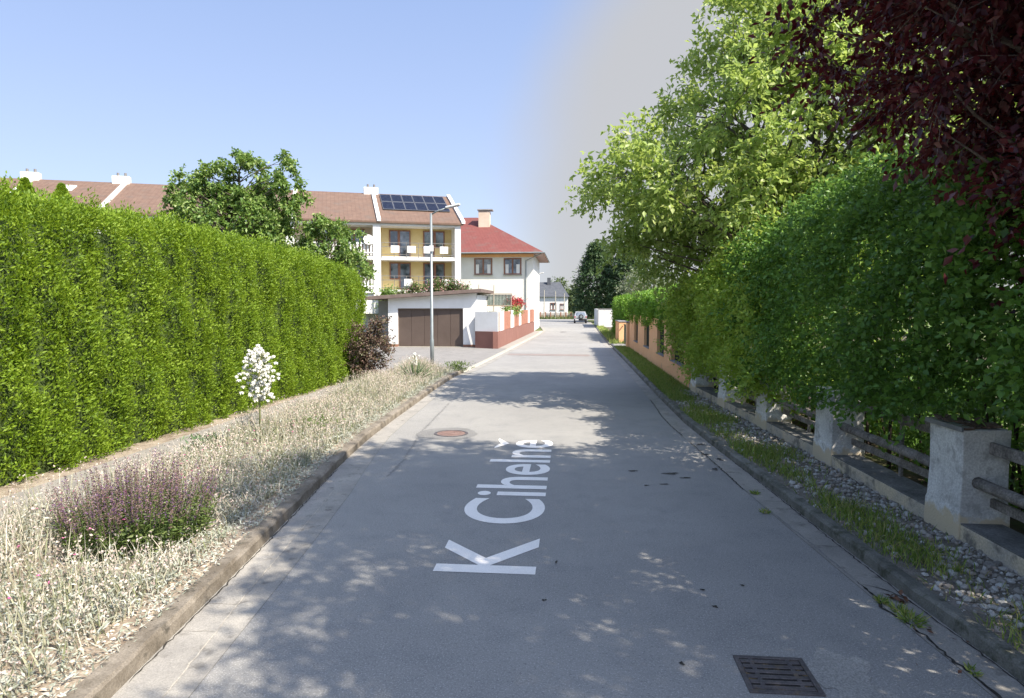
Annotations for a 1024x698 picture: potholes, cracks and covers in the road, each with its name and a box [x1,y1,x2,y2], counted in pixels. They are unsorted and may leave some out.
drain grate [733,655,826,697]
